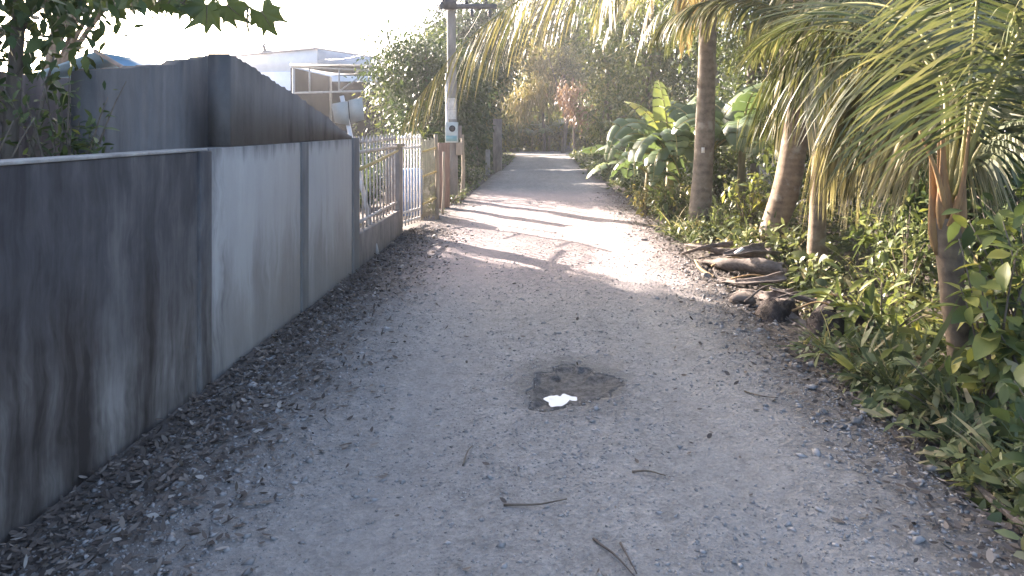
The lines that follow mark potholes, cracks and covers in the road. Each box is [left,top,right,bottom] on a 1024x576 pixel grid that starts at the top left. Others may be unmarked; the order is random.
pothole [526,365,625,412]
